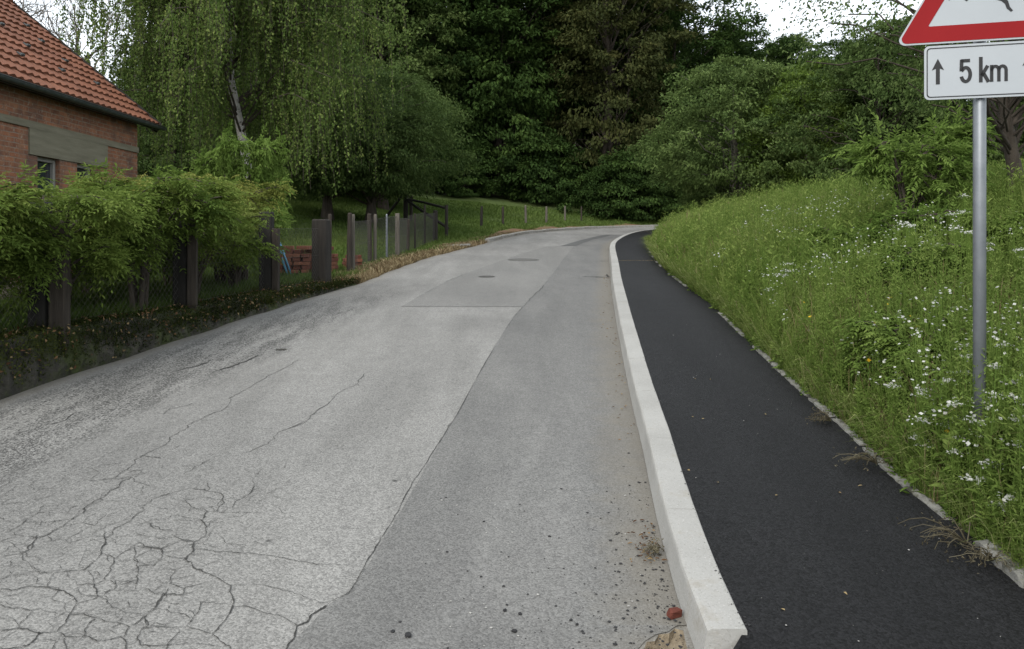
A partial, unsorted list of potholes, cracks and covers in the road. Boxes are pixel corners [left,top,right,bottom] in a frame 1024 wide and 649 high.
crack [0,355,354,649]
